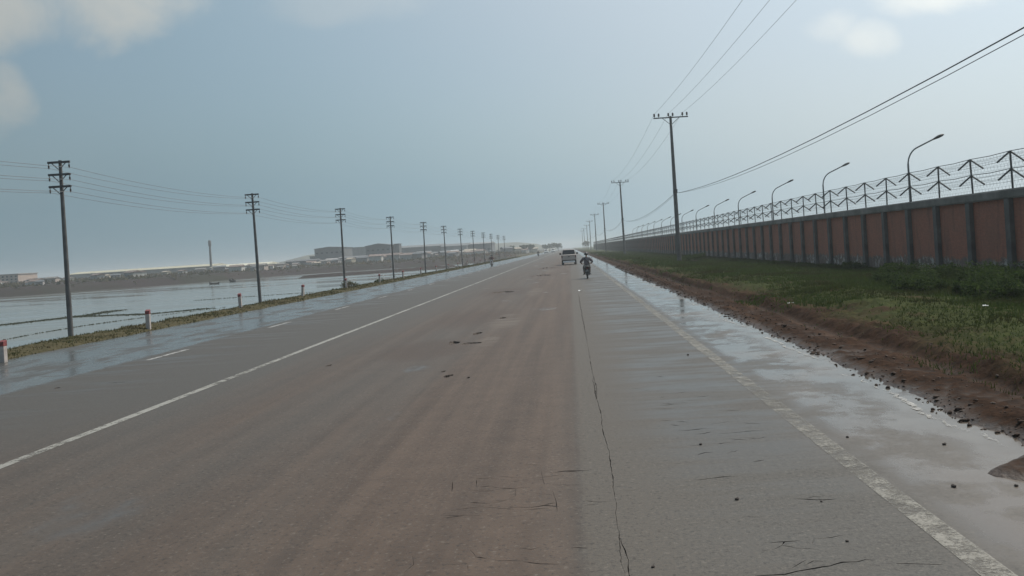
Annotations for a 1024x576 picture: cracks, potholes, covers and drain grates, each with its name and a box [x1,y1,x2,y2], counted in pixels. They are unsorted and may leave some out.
crack [448,470,587,518]
crack [579,298,632,576]
